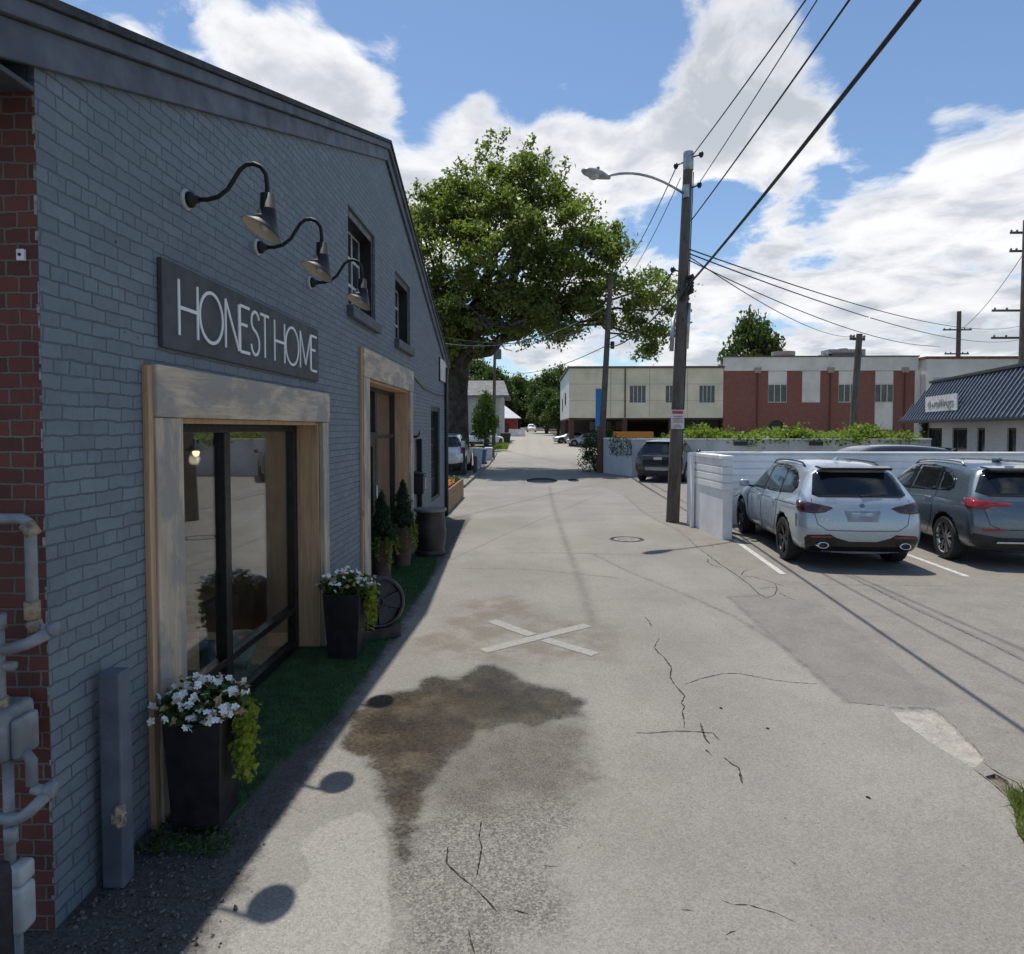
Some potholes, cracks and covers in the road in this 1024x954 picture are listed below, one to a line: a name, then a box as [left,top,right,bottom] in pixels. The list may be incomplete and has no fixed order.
crack [637,617,812,784]
crack [722,900,794,922]
crack [689,539,795,600]
crack [445,821,530,915]
